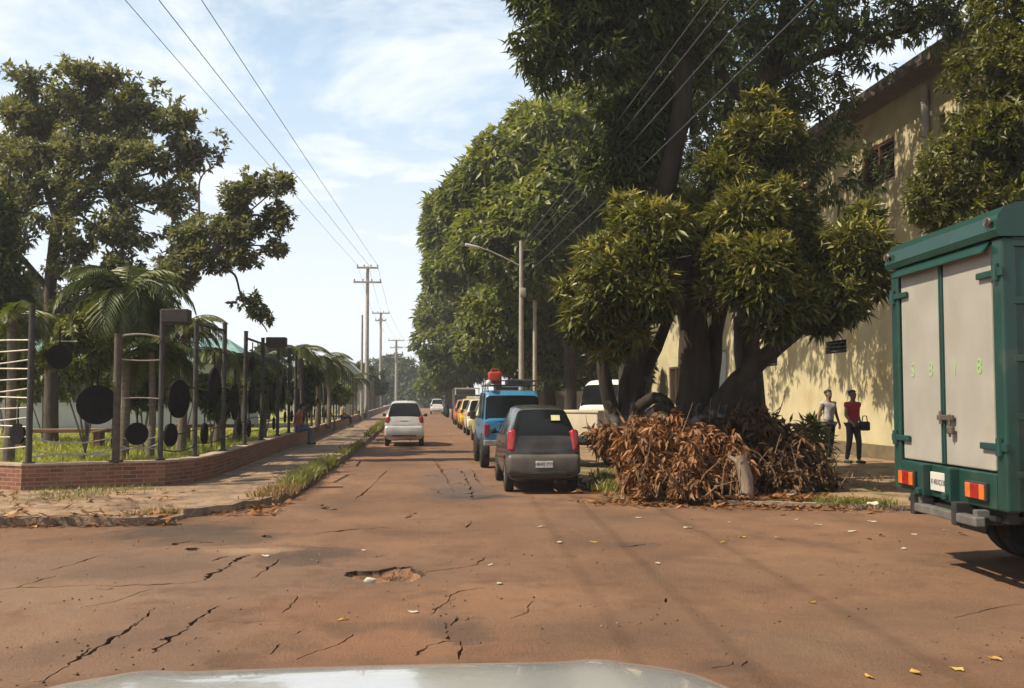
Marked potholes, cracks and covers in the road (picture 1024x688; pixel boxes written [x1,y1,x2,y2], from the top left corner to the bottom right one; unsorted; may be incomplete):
crack [316,472,386,510]
crack [415,587,484,659]
crack [270,631,354,659]
crack [0,541,279,682]
crack [406,456,497,518]
pothole [344,566,426,583]
